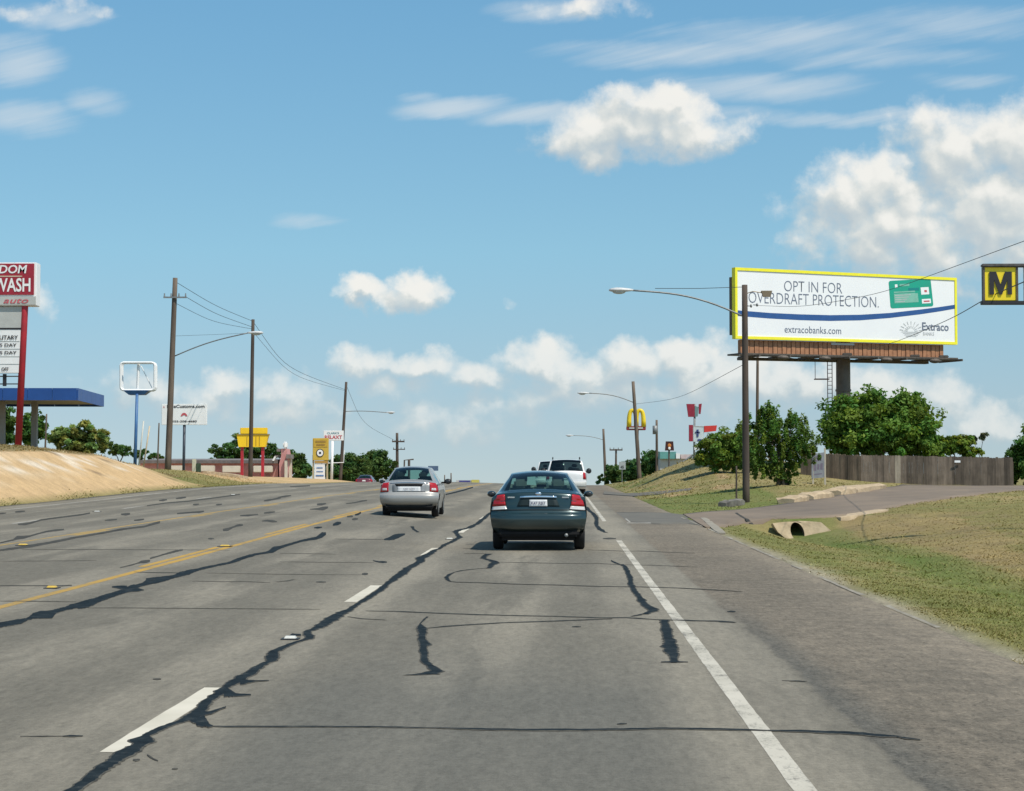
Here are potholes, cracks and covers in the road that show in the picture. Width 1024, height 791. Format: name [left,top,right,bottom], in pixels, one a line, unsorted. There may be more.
crack [212,562,374,583]
crack [511,550,688,567]
crack [46,549,183,573]
